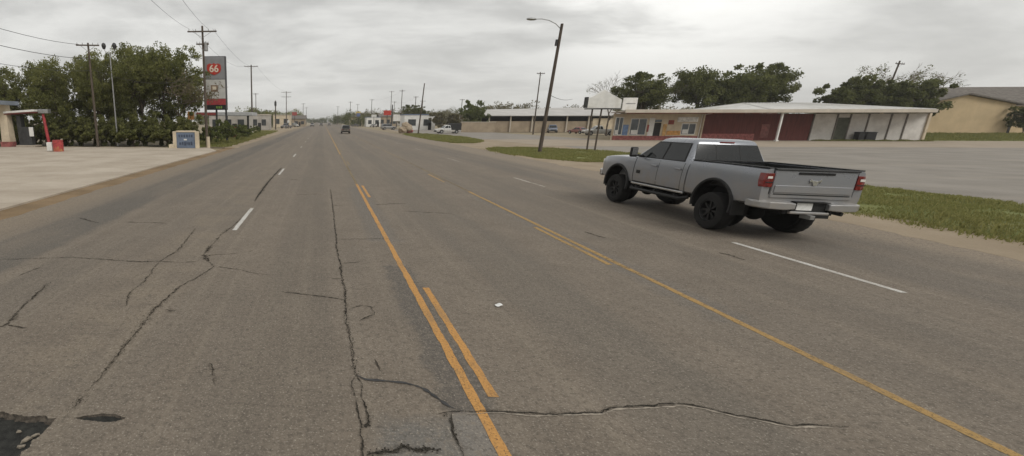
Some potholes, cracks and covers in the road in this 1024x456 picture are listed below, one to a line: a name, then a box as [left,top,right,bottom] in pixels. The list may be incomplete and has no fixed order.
pothole [75,413,125,422]
pothole [0,411,56,456]
crack [25,219,267,407]
crack [0,268,51,328]
crack [288,190,850,456]
